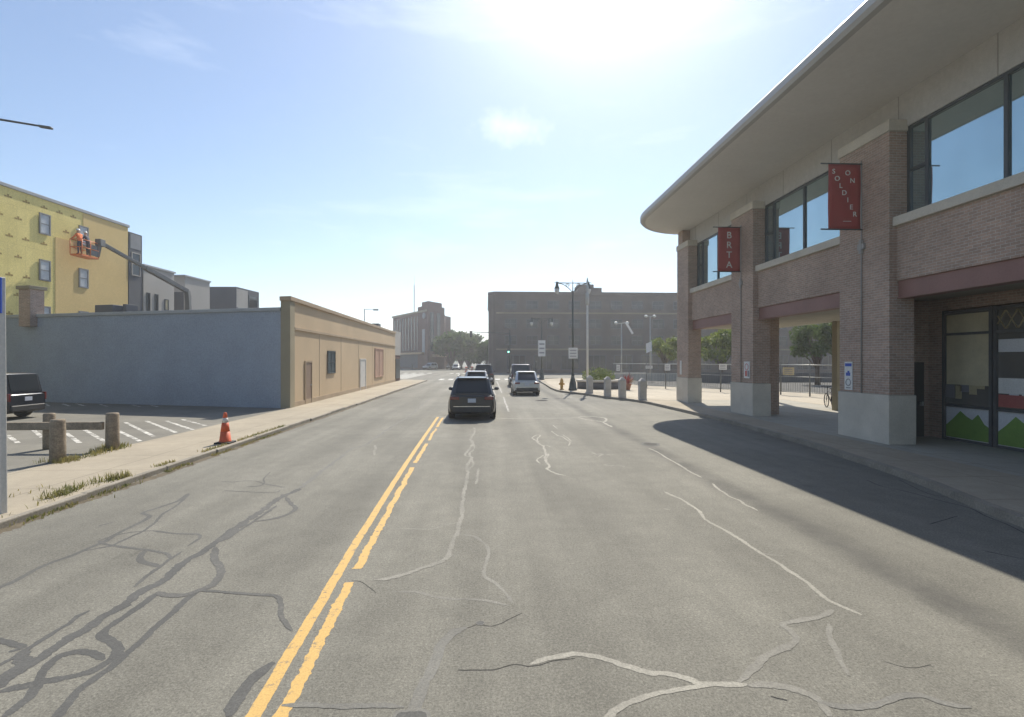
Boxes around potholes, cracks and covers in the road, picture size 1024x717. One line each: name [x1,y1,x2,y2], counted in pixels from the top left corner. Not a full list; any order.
crack [474,448,1024,717]
crack [352,428,521,628]
crack [532,411,612,476]
crack [221,472,285,493]
